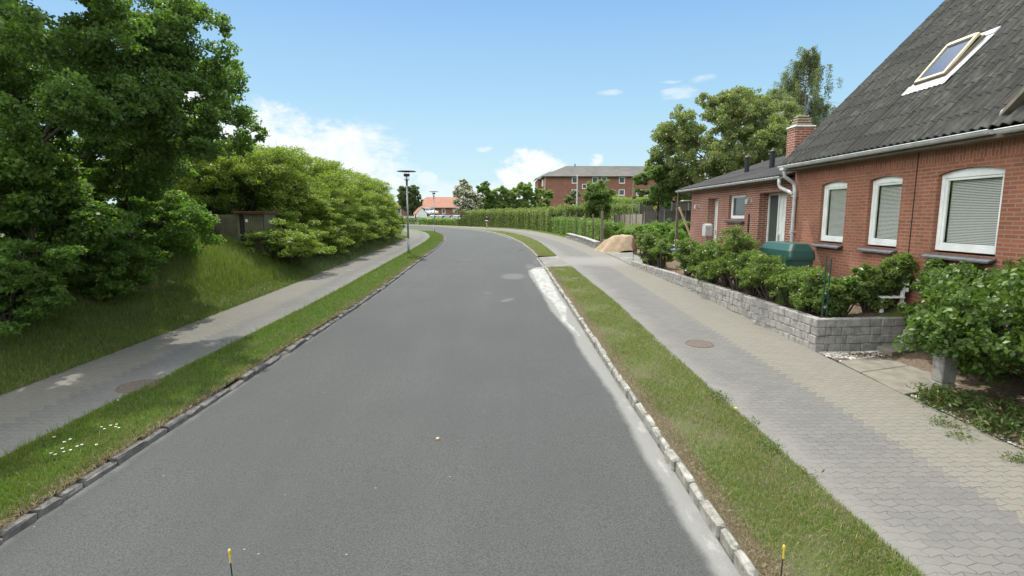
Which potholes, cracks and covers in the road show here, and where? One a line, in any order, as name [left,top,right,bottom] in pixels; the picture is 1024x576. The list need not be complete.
manhole cover [685,340,714,348]
manhole cover [114,379,161,393]
